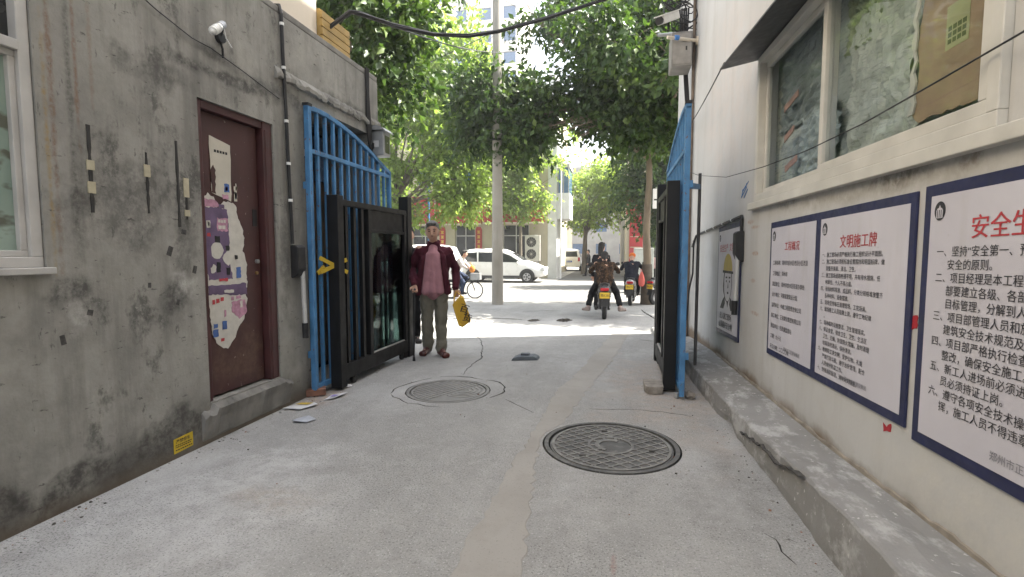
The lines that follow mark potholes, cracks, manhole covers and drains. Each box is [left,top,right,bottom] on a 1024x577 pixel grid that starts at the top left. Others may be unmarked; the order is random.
crack [391,336,534,413]
manhole cover [543,422,682,475]
crack [601,409,691,417]
manhole cover [405,380,491,403]
